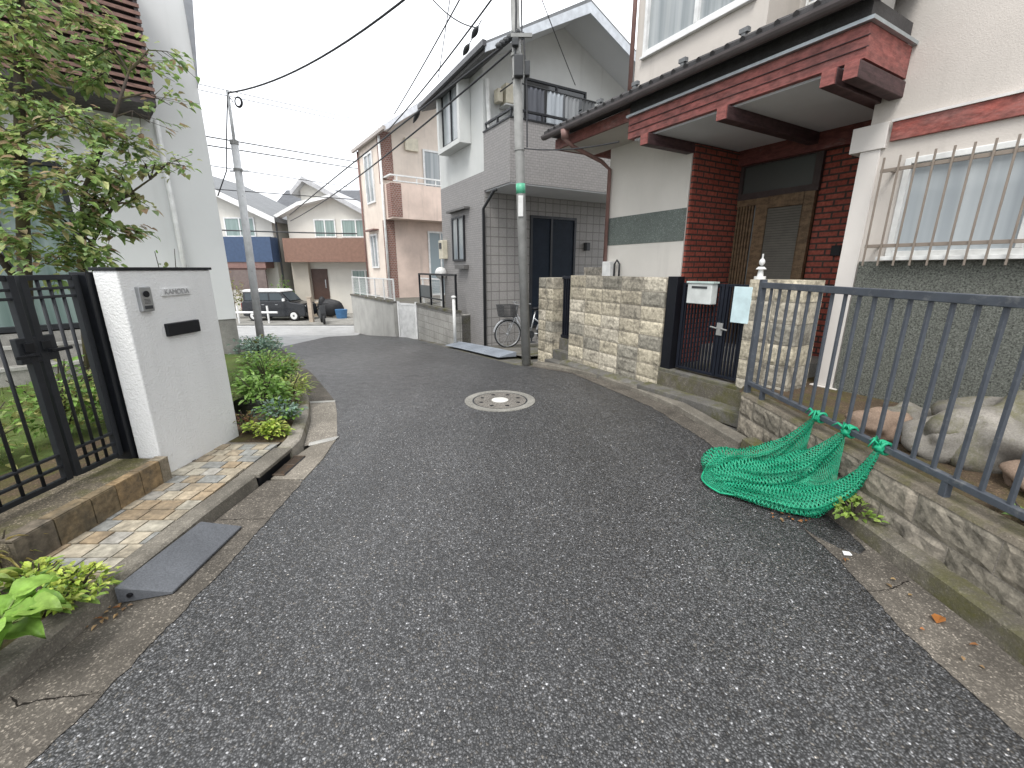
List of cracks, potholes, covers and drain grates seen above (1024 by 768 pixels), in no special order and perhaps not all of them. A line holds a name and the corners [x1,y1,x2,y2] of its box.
manhole cover [465,390,535,412]
crack [10,691,103,708]
